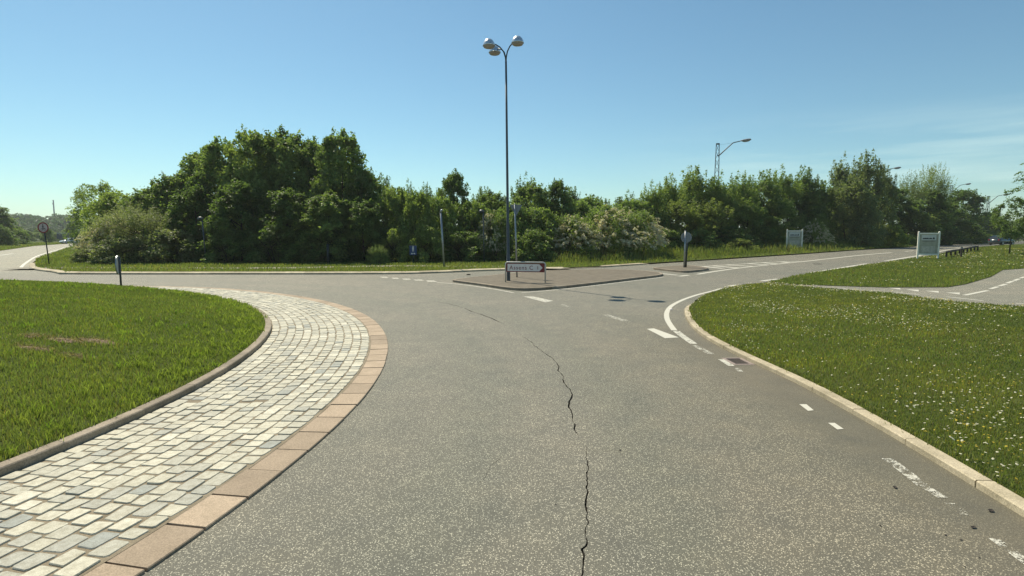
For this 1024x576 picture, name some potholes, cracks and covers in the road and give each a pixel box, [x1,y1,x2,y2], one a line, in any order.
crack [524,337,589,576]
